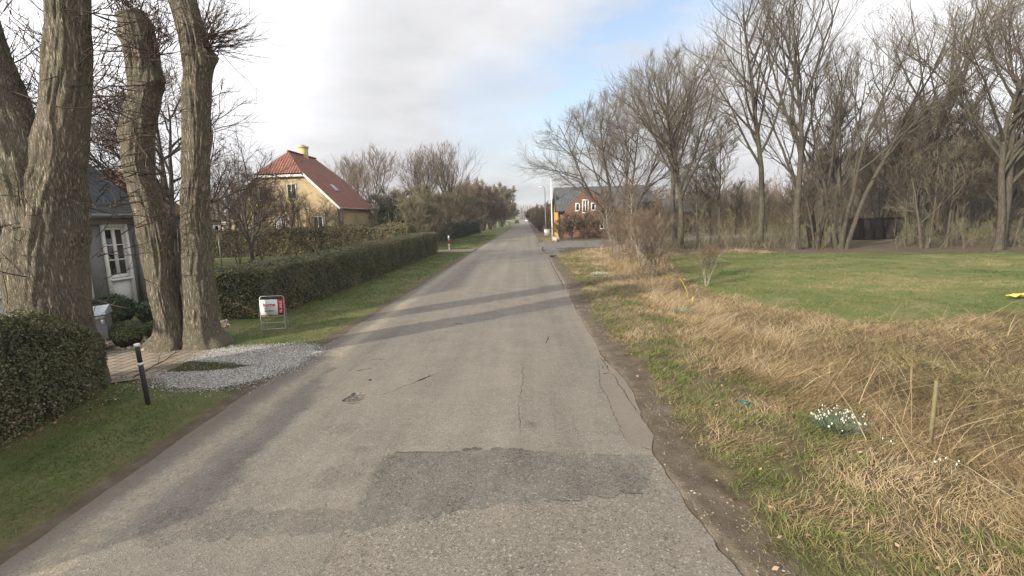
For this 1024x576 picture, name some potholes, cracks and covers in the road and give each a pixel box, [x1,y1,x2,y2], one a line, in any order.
pothole [342,392,368,402]
crack [596,359,638,435]
